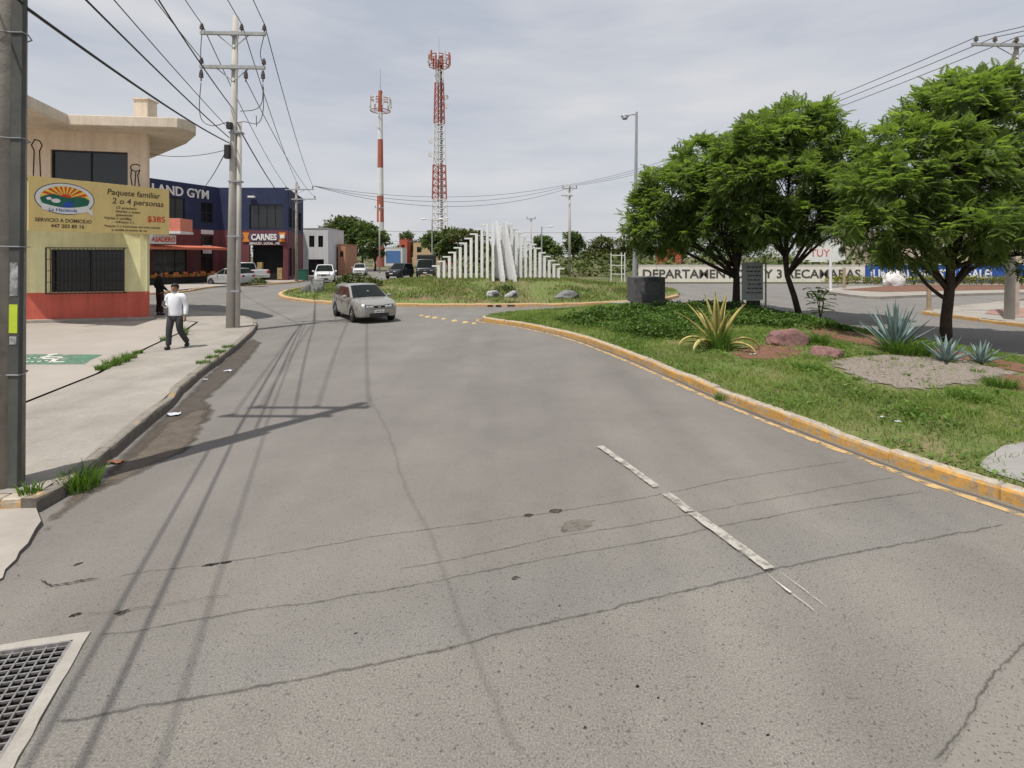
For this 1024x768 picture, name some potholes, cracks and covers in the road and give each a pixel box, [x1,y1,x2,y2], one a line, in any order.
drain grate [0,631,91,768]
